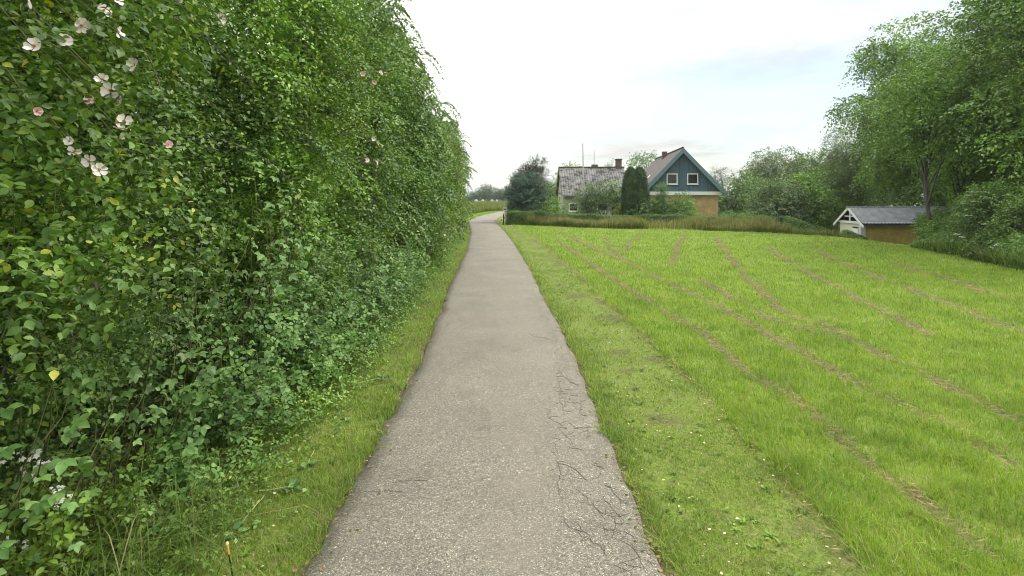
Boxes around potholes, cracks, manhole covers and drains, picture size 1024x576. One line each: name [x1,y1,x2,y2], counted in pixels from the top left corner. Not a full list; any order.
crack [547,373,653,572]
